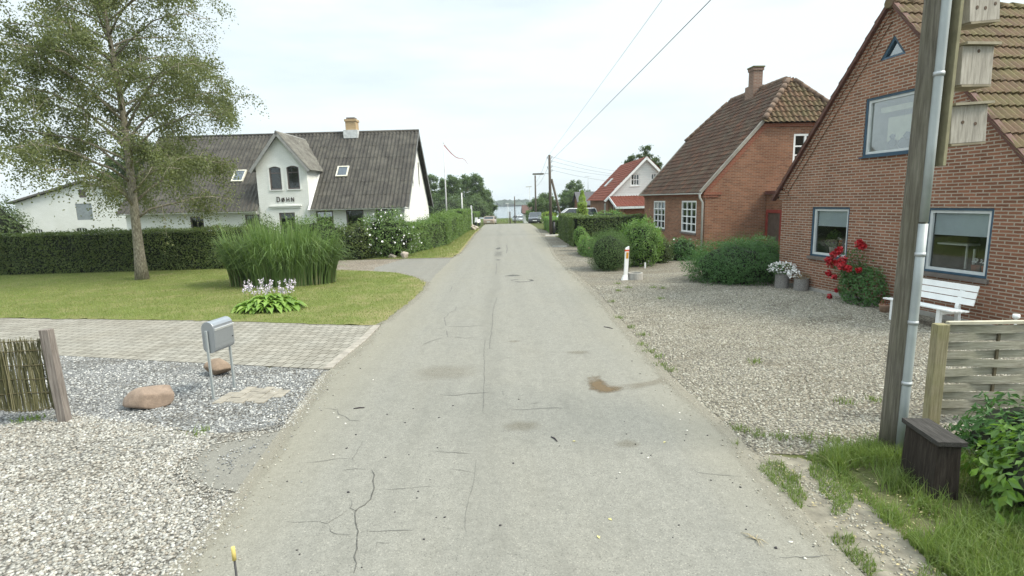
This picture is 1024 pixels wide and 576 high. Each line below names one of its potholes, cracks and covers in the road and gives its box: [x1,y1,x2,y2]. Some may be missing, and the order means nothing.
crack [287,448,375,572]
